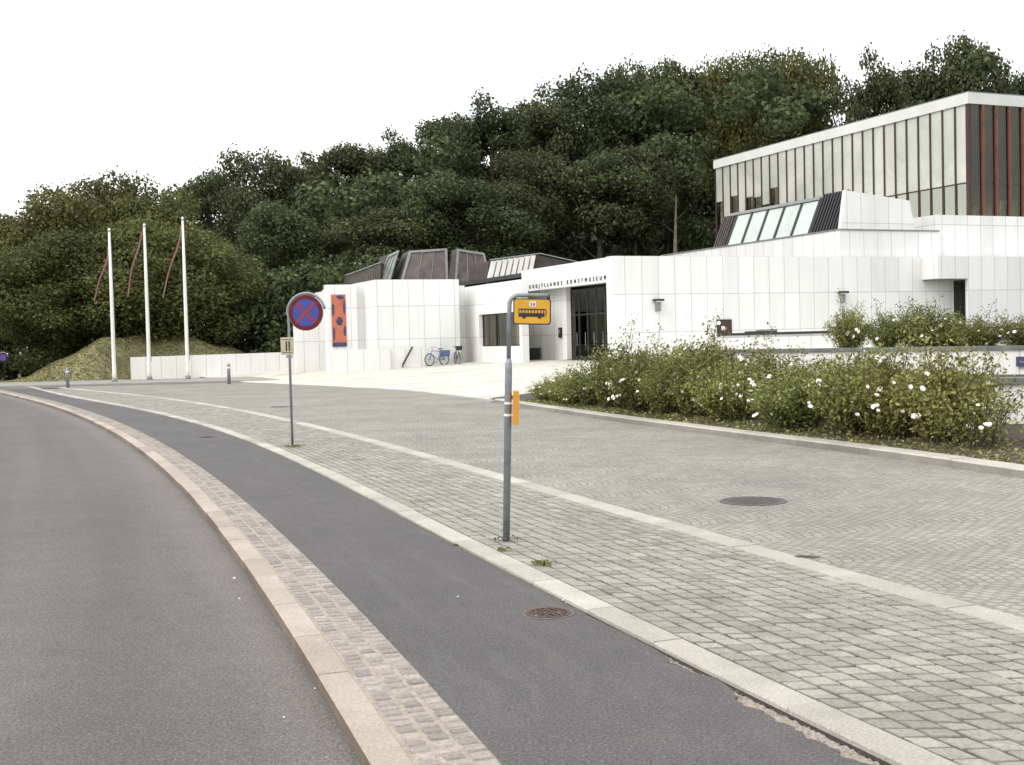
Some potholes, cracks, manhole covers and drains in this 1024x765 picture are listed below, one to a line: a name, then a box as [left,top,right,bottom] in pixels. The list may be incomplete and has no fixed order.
pothole [730,687,882,765]
manhole cover [720,496,787,506]
